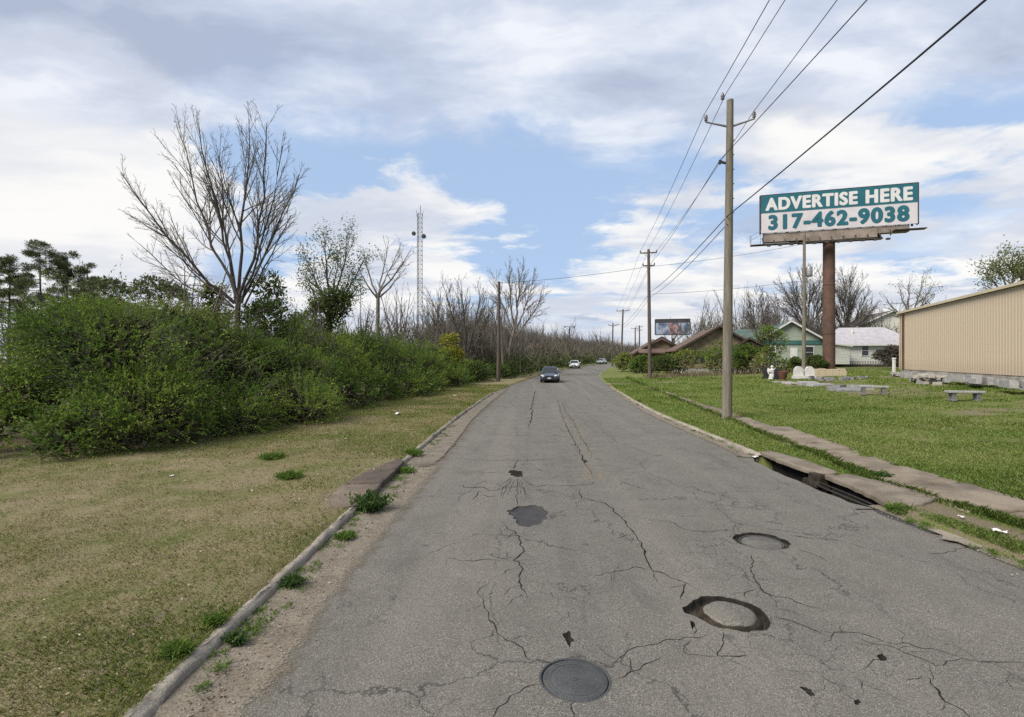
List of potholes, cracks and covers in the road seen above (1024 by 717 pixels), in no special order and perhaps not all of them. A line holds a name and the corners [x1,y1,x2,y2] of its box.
manhole cover [539,657,612,703]
crack [662,520,822,609]
crack [446,524,574,717]
drain grate [737,451,939,510]
crack [603,623,747,678]
manhole cover [739,535,785,550]
crack [460,399,690,599]
crack [770,616,1022,717]
